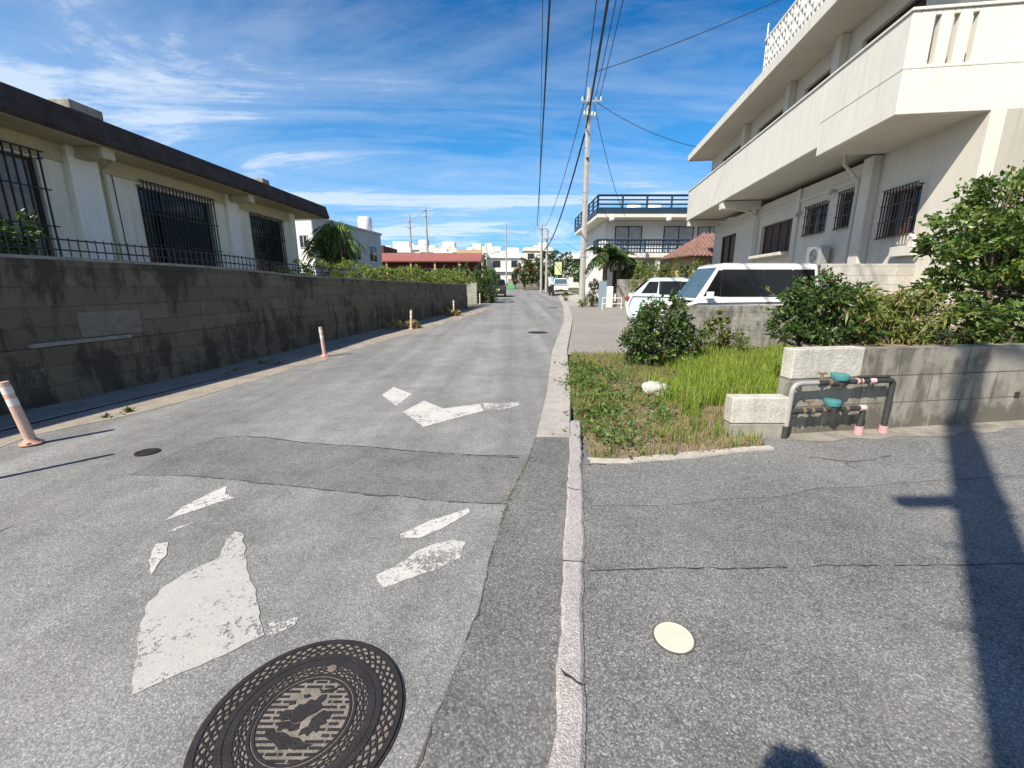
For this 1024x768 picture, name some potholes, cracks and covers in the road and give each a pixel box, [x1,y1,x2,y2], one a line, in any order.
manhole cover [183,639,405,768]
manhole cover [652,621,696,655]
crack [589,563,1015,571]
manhole cover [134,448,160,457]
